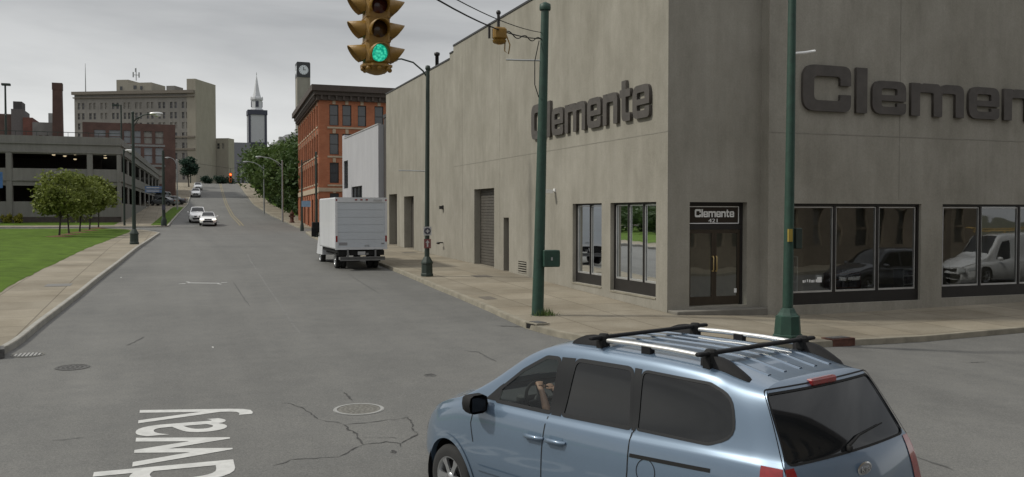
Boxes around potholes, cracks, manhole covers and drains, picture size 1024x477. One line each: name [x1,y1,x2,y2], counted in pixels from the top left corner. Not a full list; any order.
manhole cover [333,403,384,415]
crack [275,403,418,465]
